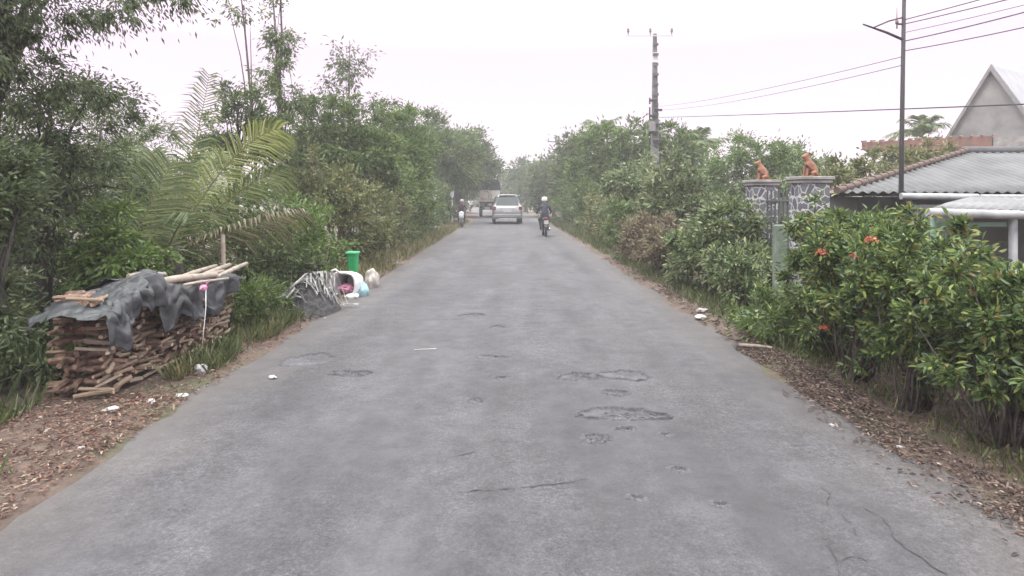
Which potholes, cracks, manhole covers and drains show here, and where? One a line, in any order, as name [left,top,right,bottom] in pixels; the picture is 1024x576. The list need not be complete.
pothole [464,396,488,405]
pothole [579,432,614,446]
crack [460,479,583,492]
pothole [598,389,632,397]
pothole [623,493,648,502]
pothole [554,371,608,381]
pothole [589,369,654,382]
pothole [573,406,675,421]
crack [821,487,947,574]
pothole [665,465,692,474]
pothole [277,352,337,367]
